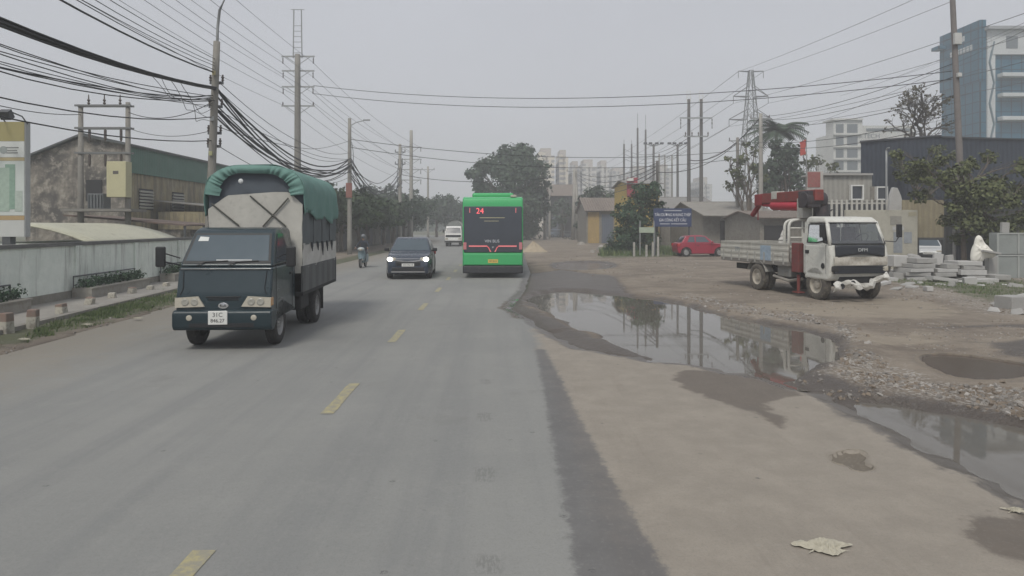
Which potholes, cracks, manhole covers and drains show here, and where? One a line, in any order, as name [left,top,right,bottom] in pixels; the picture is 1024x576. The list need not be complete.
pothole [914,352,1024,381]
